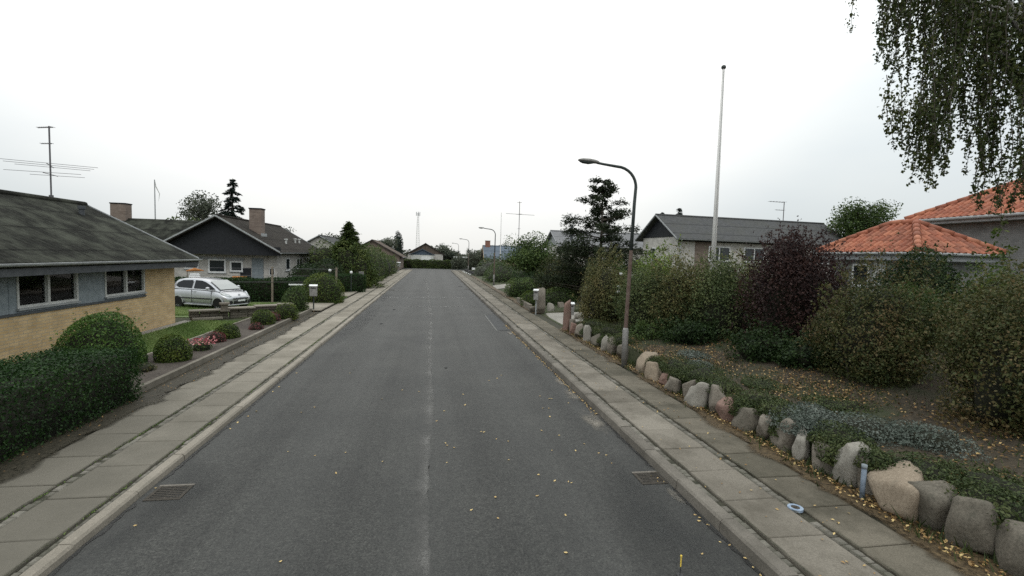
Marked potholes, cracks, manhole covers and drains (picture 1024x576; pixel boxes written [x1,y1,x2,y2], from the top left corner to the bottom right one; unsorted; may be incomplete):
drain grate [142,484,195,502]
drain grate [632,471,668,485]
